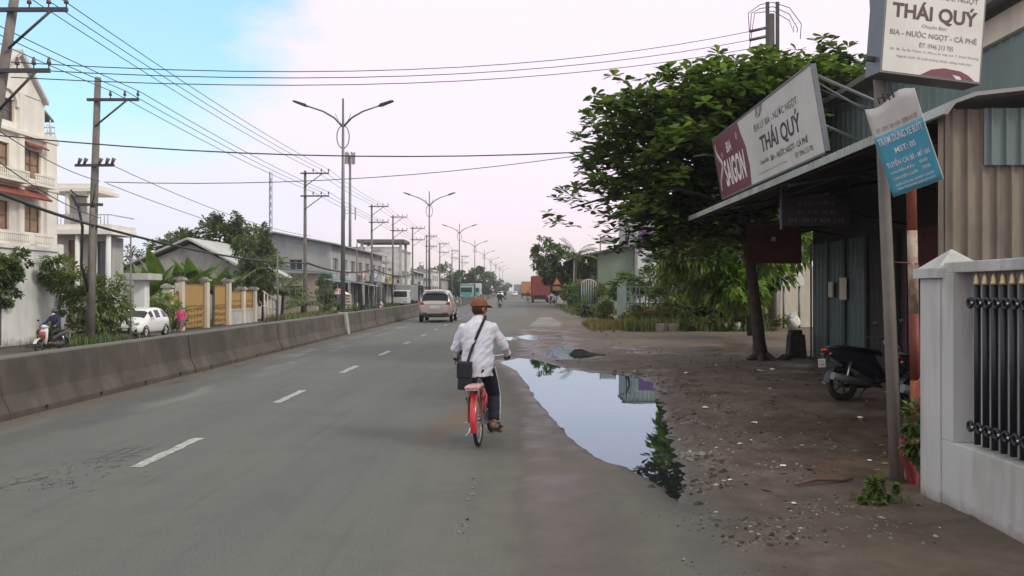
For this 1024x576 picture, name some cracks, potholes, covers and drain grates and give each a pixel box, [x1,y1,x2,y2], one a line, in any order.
pothole [500,358,694,504]
crack [2,444,159,491]
